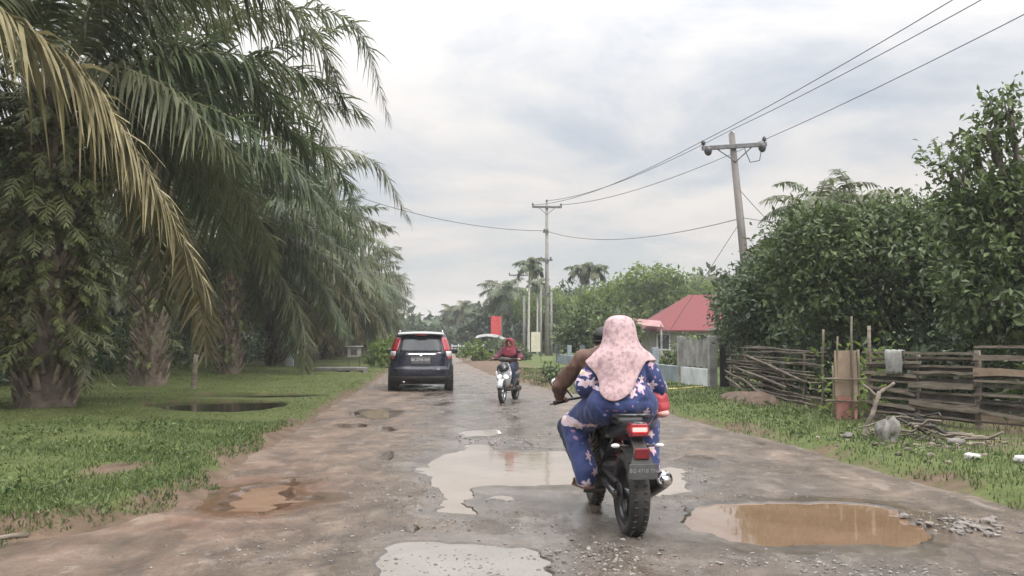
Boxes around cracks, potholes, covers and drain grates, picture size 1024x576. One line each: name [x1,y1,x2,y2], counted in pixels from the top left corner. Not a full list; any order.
pothole [371,540,556,576]
pothole [407,444,575,515]
pothole [378,451,394,460]
pothole [455,429,503,437]
pothole [681,501,935,547]
pothole [360,409,391,419]
pothole [213,478,326,514]
